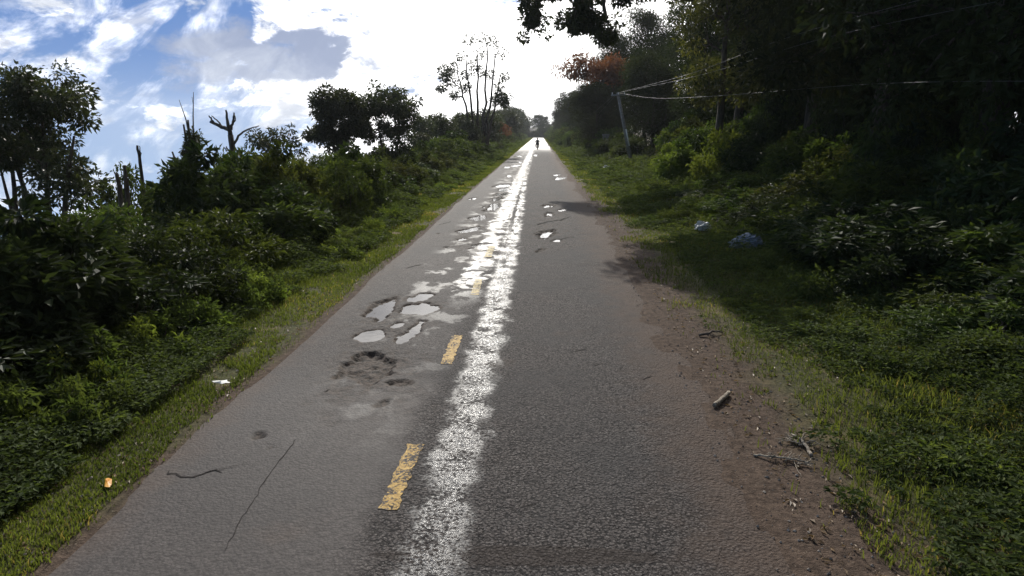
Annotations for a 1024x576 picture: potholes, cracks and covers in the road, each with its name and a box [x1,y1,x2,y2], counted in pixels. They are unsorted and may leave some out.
pothole [387,318,432,346]
pothole [466,214,488,222]
pothole [382,319,411,330]
pothole [395,301,448,317]
pothole [532,229,560,240]
pothole [480,202,504,212]
pothole [356,296,403,324]
pothole [401,291,440,303]
pothole [378,378,421,391]
pothole [454,225,487,233]
pothole [325,348,405,390]
